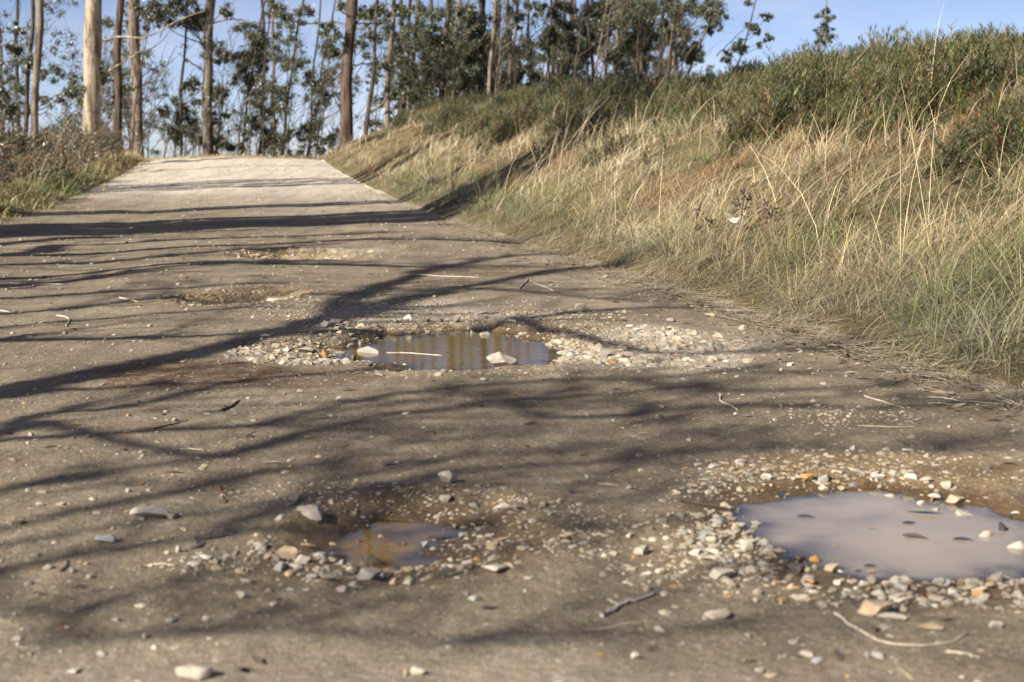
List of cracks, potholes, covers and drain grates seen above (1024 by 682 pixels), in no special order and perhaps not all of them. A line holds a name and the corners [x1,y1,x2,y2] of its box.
pothole [723,472,1024,591]
pothole [226,247,374,260]
pothole [259,487,564,590]
pothole [169,287,316,306]
pothole [306,317,595,372]
